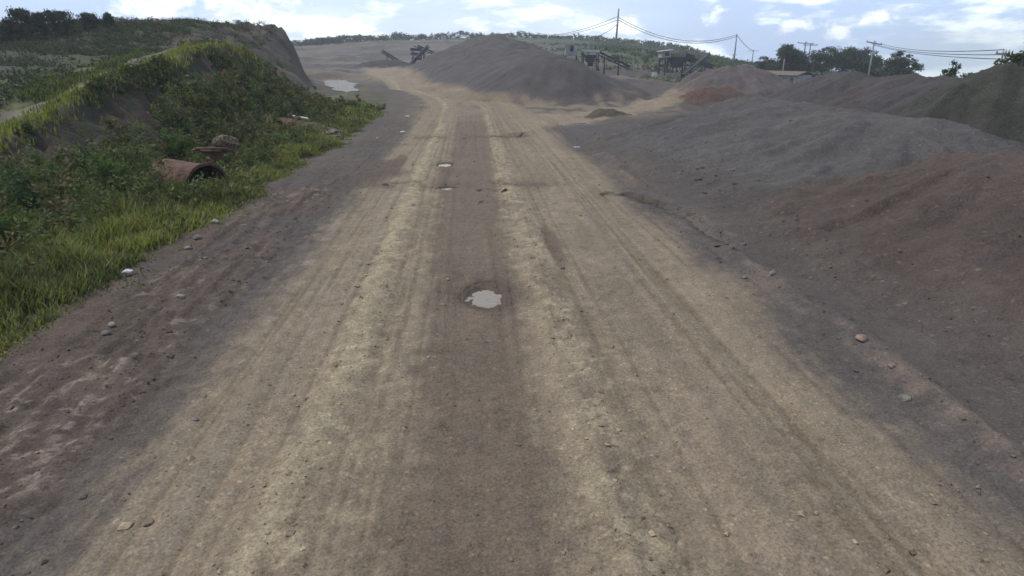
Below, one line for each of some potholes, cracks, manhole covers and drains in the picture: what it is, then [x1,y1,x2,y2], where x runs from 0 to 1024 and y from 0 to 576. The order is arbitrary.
pothole [445,275,522,315]
